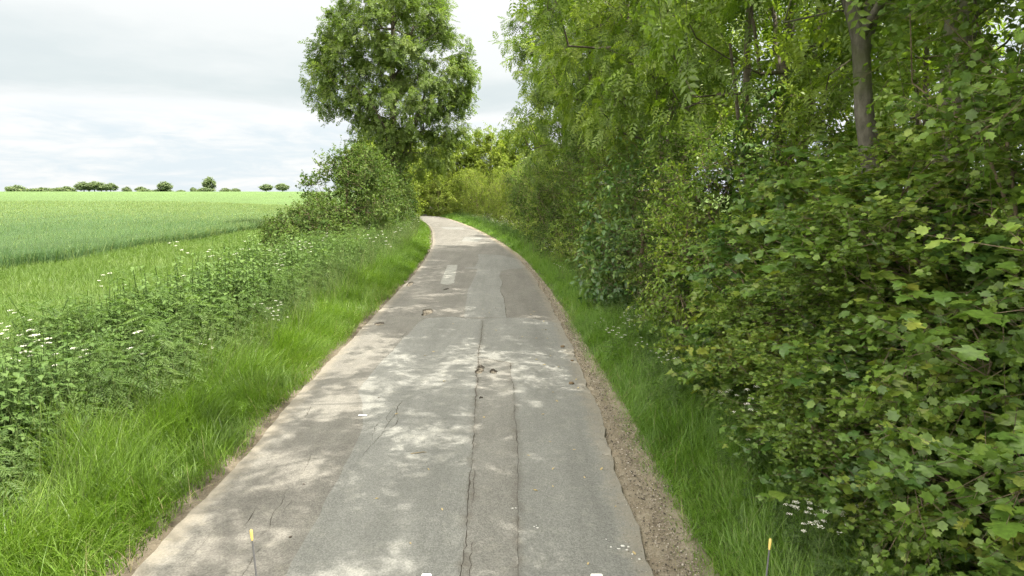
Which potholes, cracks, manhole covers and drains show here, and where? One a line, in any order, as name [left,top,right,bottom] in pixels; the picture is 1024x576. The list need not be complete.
crack [363,403,401,455]
crack [243,495,296,574]
crack [460,321,519,576]
